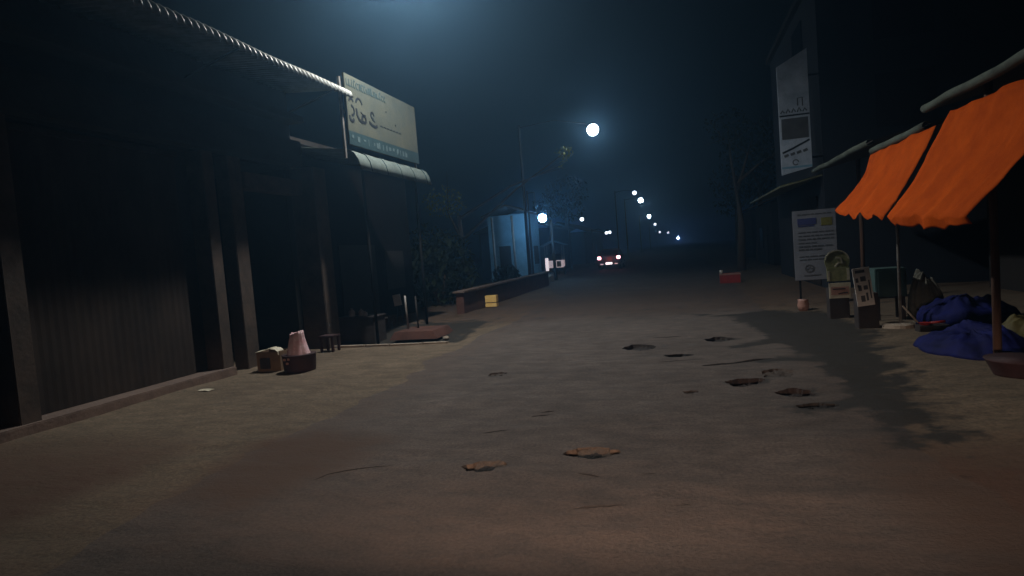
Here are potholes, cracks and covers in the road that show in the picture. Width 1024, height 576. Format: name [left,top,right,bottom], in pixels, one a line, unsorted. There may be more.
pothole [775,388,816,397]
crack [315,466,383,480]
crack [664,358,772,366]
pothole [725,378,765,387]
pothole [762,369,794,377]
